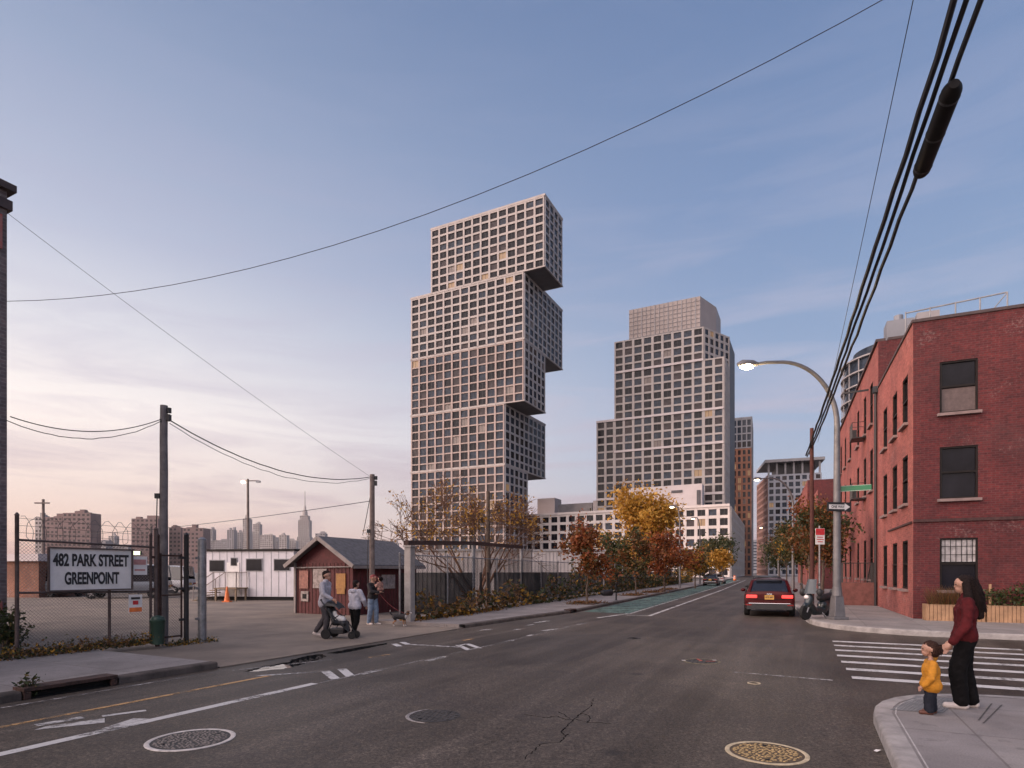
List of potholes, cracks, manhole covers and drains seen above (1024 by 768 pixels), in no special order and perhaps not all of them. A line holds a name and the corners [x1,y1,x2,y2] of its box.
manhole cover [143,728,236,752]
manhole cover [725,741,810,766]
pothole [245,654,327,672]
manhole cover [405,709,460,723]
crack [517,702,609,759]
drain grate [13,673,118,700]
